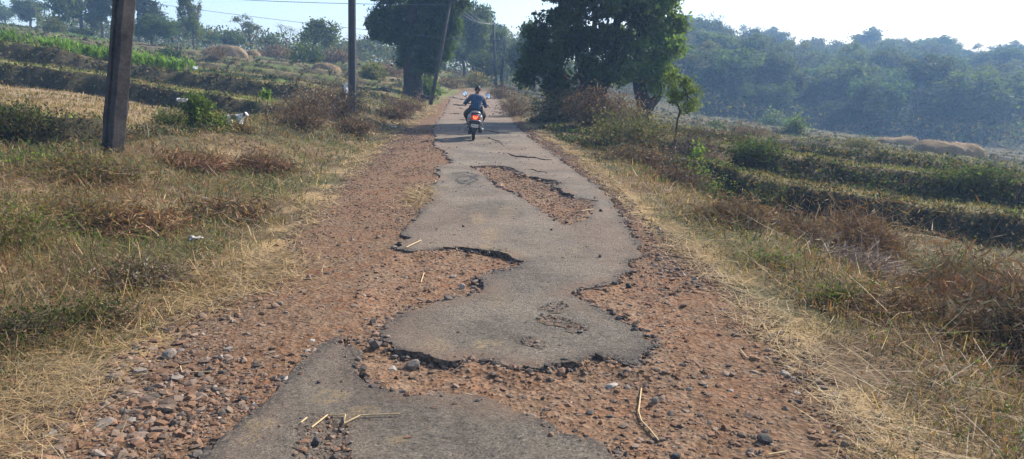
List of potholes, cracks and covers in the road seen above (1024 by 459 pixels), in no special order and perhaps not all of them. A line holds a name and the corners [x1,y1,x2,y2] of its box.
pothole [354,248,520,338]
pothole [536,312,590,333]
pothole [470,165,594,225]
